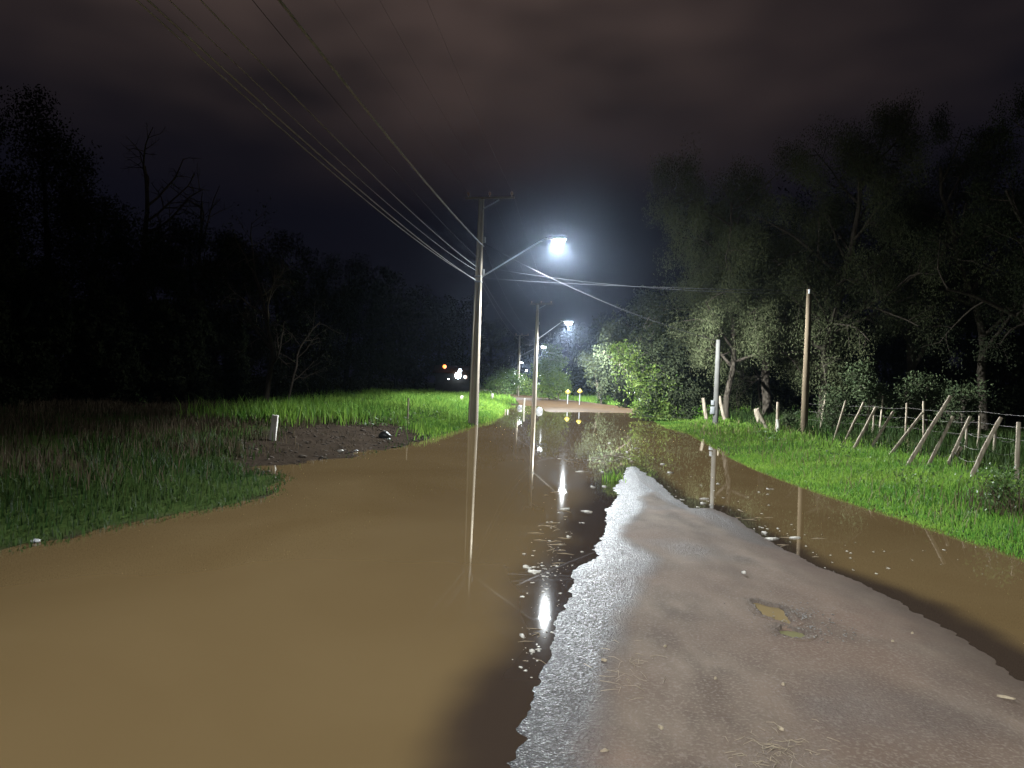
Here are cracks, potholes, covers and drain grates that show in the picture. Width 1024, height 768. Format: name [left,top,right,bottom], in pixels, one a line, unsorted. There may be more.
pothole [741,591,846,631]
